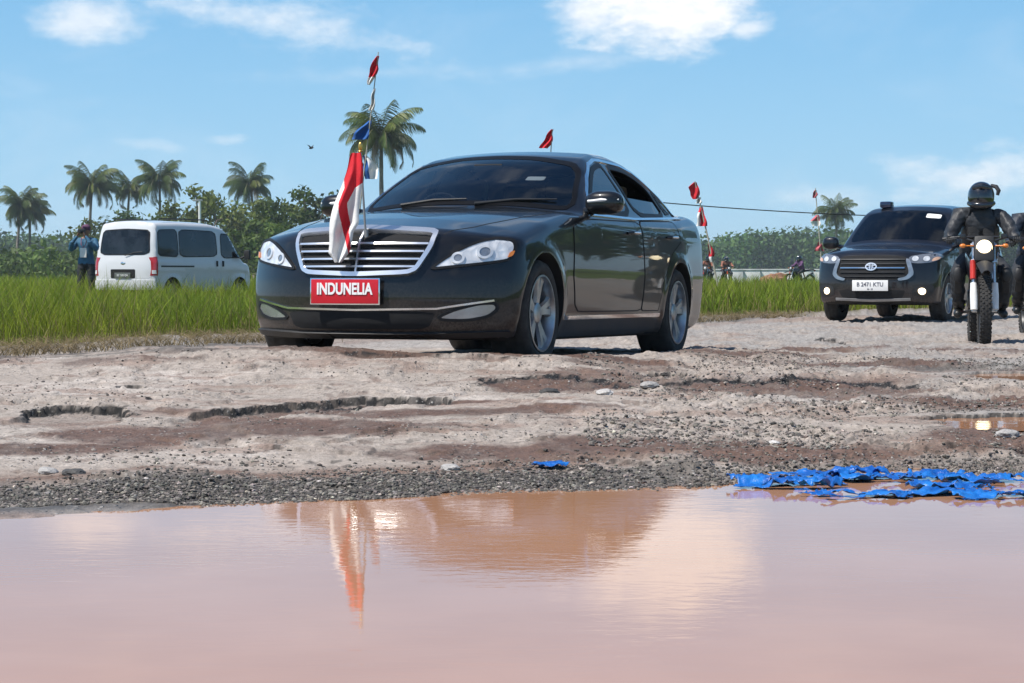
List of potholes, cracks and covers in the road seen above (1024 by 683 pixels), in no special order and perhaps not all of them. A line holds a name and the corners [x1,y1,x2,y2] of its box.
pothole [137,401,367,432]
pothole [0,401,146,430]
pothole [0,470,1018,519]
pothole [909,412,1024,432]
pothole [319,396,473,414]
pothole [957,371,1024,379]
pothole [469,372,638,394]
